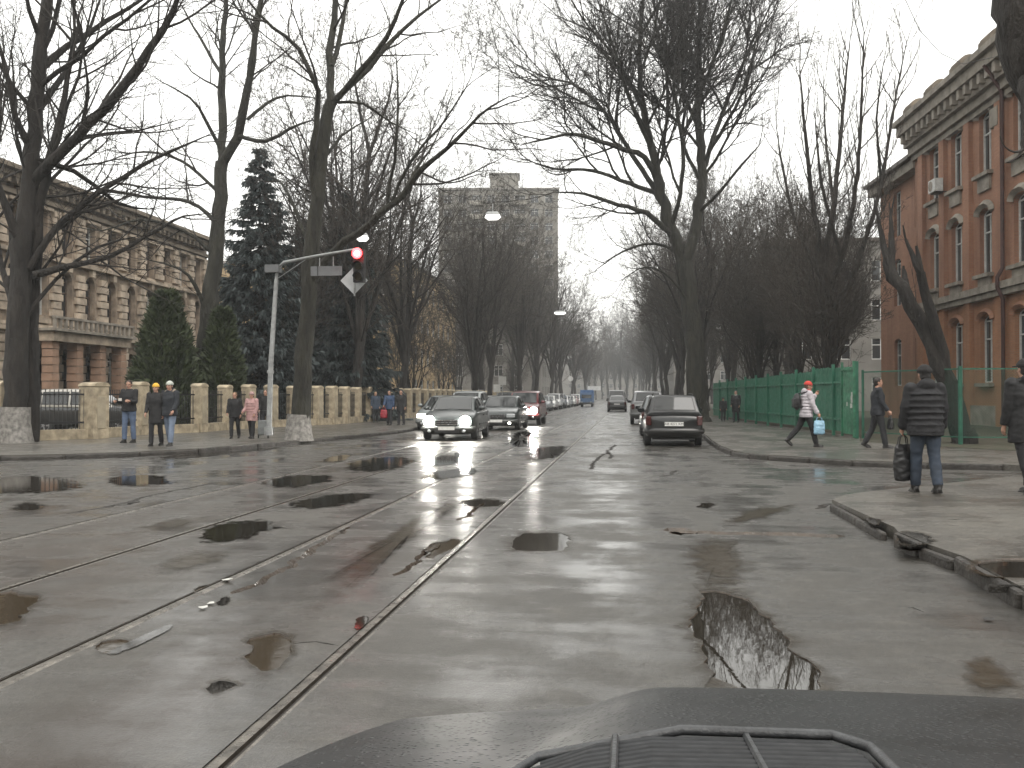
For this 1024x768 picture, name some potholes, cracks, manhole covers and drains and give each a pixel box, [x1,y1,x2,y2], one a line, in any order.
pothole [0,591,41,625]
pothole [684,588,830,691]
pothole [970,557,1024,579]
pothole [206,678,241,694]
crack [589,445,617,475]
pothole [242,632,295,668]
